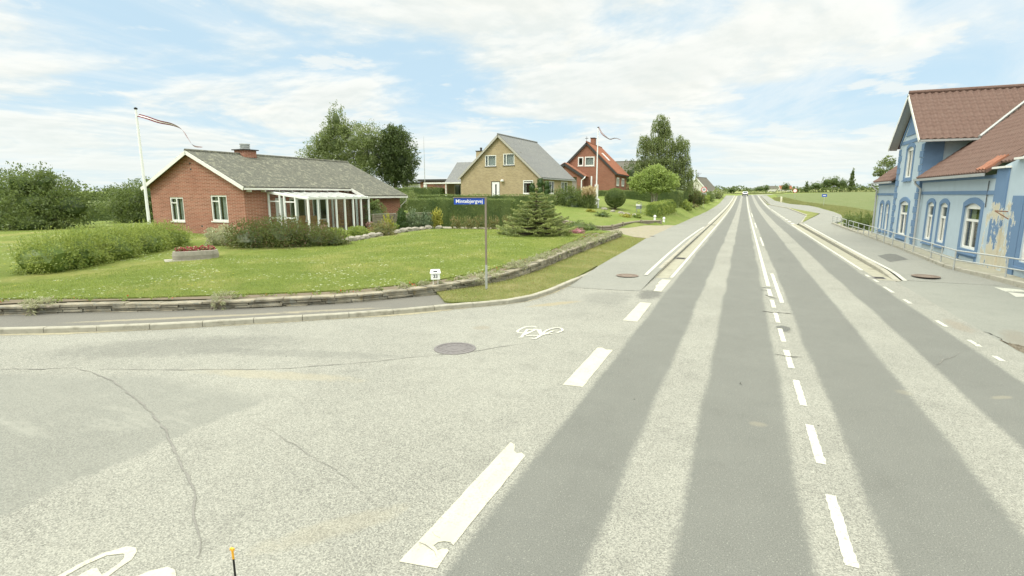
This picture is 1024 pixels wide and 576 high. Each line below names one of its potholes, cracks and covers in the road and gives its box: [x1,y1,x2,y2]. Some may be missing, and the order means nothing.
crack [158,341,537,370]
manhole cover [434,342,476,355]
crack [13,367,201,557]
crack [266,426,377,504]
